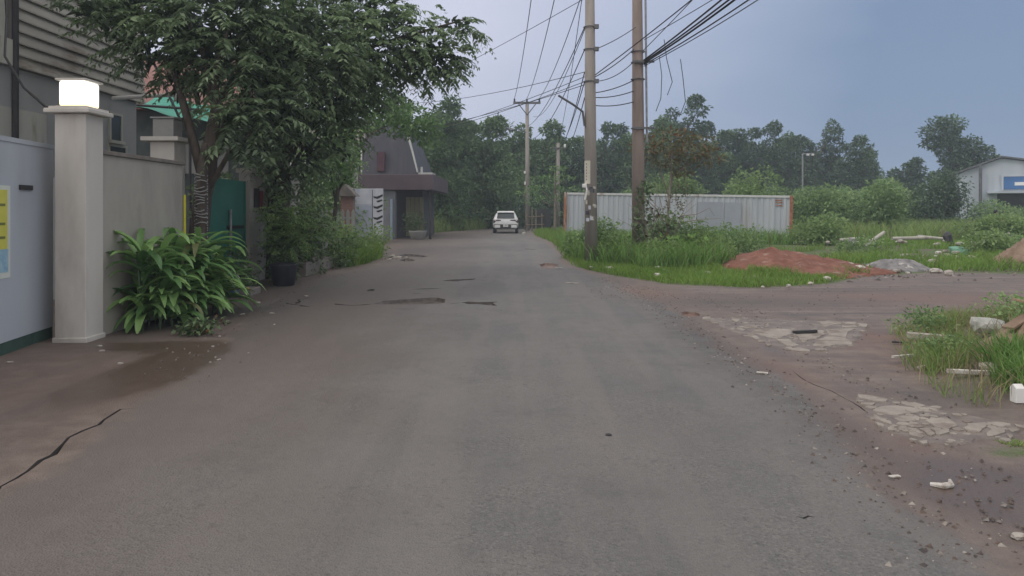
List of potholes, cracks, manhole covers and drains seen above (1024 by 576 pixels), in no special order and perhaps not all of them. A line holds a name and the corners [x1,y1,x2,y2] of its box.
crack [0,408,136,489]
